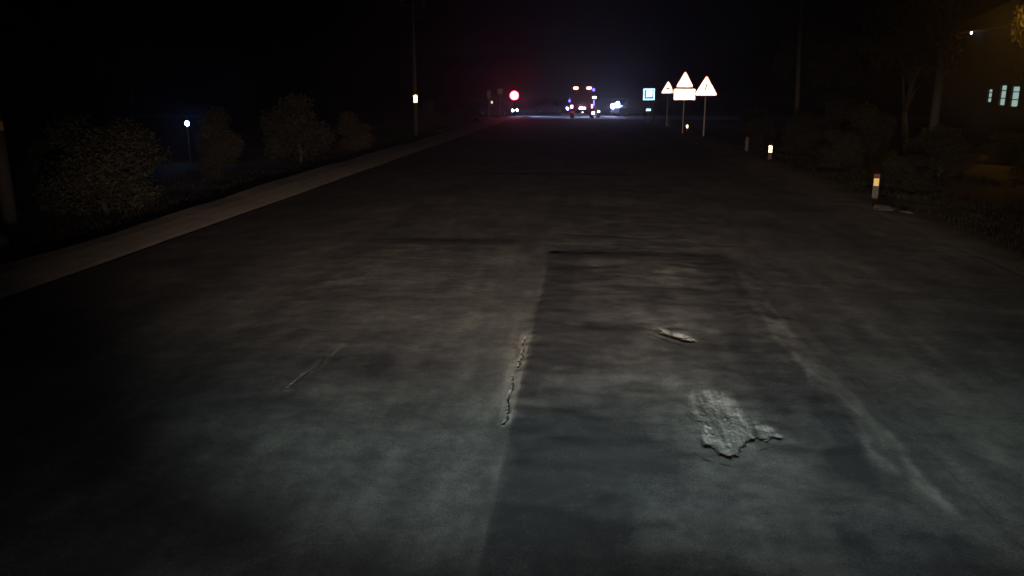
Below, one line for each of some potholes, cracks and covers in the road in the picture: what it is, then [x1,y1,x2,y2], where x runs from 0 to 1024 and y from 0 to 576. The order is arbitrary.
crack [273,341,352,394]
crack [490,333,537,429]
pothole [639,321,709,347]
pothole [673,384,798,466]
